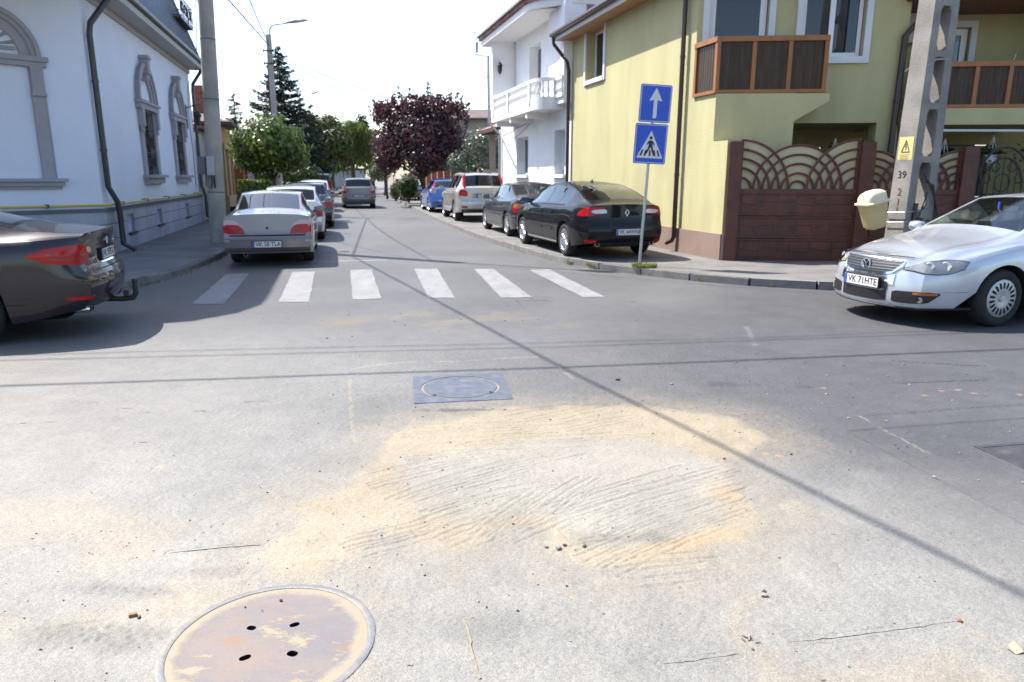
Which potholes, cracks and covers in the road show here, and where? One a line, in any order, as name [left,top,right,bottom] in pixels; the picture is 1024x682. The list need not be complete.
crack [656,649,745,671]
manhole cover [155,584,376,682]
manhole cover [413,373,513,404]
